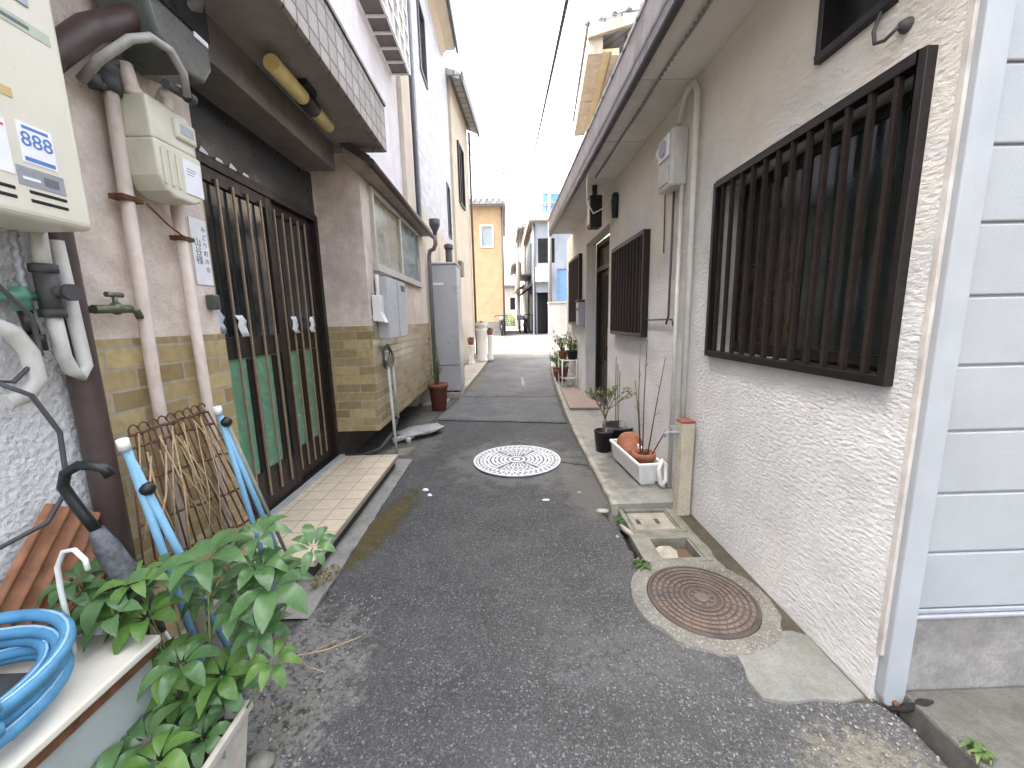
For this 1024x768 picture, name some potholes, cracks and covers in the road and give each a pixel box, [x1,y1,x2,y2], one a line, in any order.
manhole cover [473,445,561,478]
manhole cover [630,559,782,657]
